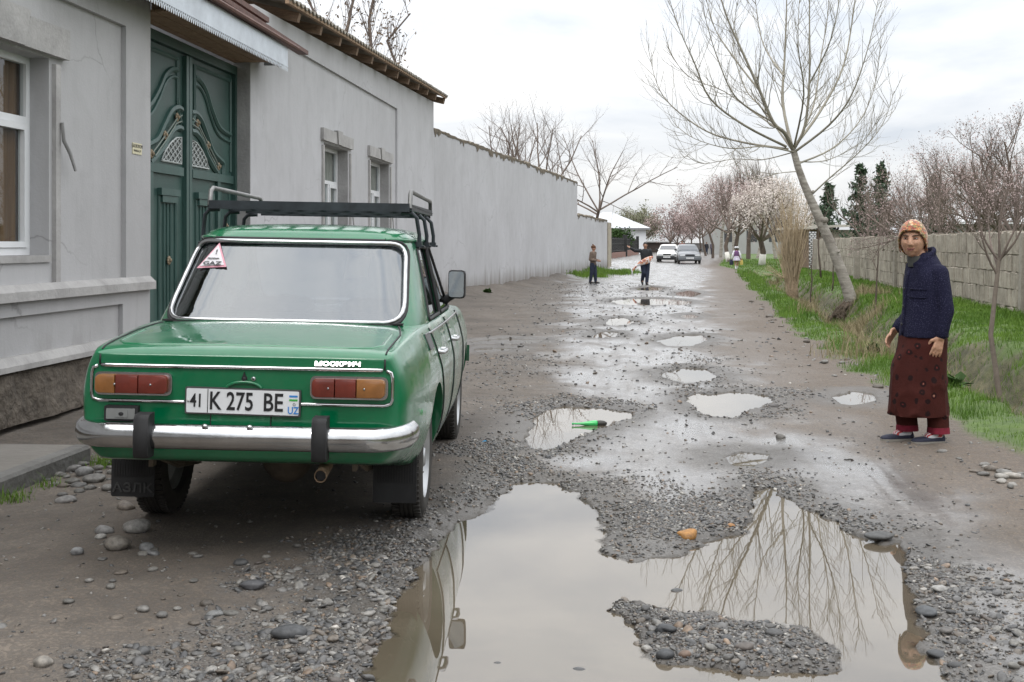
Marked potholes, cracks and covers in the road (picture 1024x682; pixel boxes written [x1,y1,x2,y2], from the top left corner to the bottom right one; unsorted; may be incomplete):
pothole [650,365,726,383]
pothole [331,476,980,682]
pothole [821,388,889,405]
pothole [600,315,639,326]
pothole [514,402,643,450]
pothole [602,297,698,305]
pothole [653,332,717,346]
pothole [710,447,784,468]
pothole [677,389,784,419]
